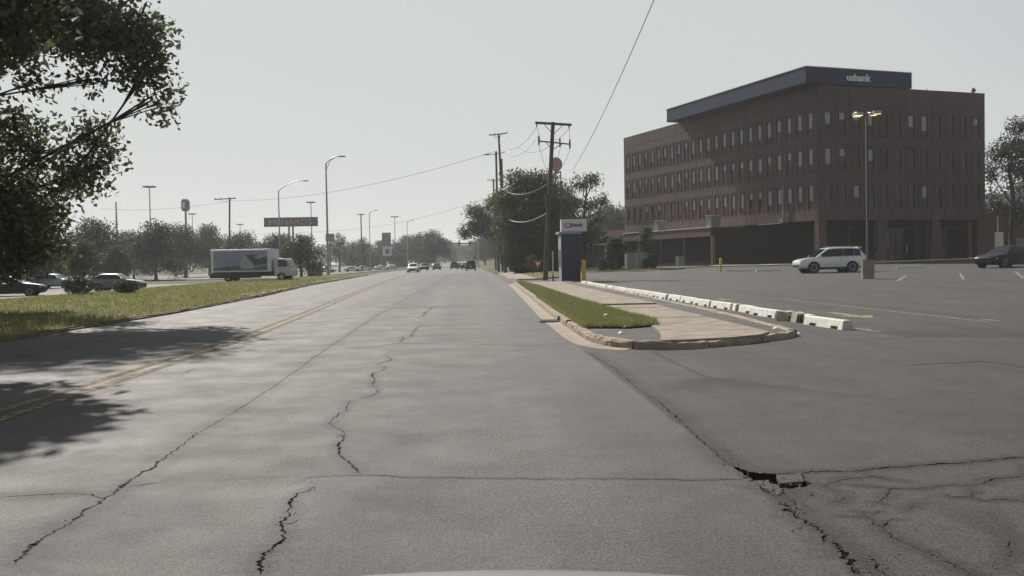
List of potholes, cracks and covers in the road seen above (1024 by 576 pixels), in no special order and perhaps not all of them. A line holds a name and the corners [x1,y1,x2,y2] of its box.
crack [804,457,1024,576]
pothole [733,466,811,493]
crack [9,276,736,575]
